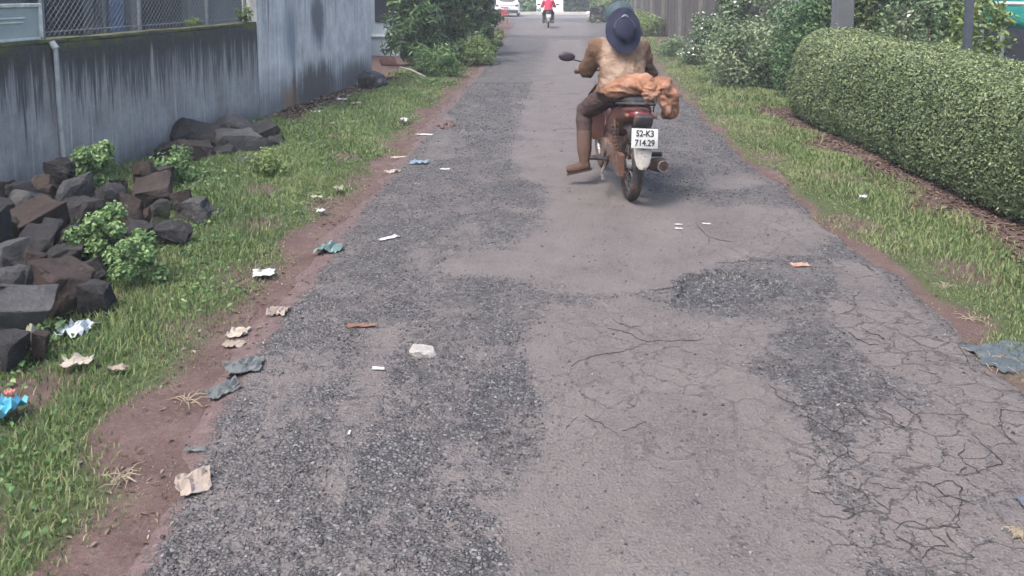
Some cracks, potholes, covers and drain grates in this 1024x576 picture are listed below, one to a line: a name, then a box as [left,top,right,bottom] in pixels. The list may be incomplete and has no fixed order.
crack [566,403,642,433]
crack [770,370,1023,559]
crack [572,317,704,366]
